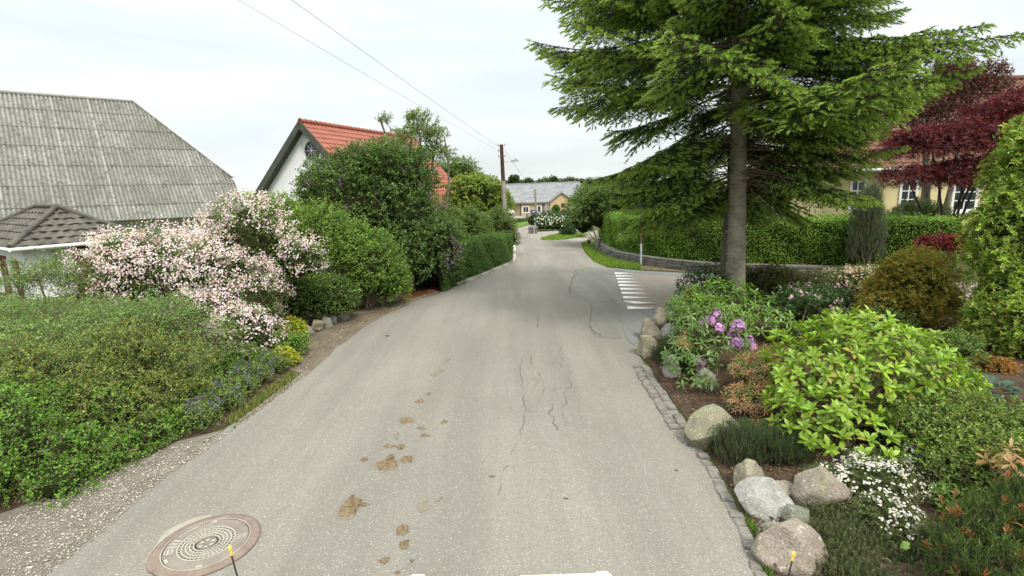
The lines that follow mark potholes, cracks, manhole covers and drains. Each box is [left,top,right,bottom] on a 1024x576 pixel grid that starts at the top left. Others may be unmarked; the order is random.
manhole cover [146,514,261,576]
